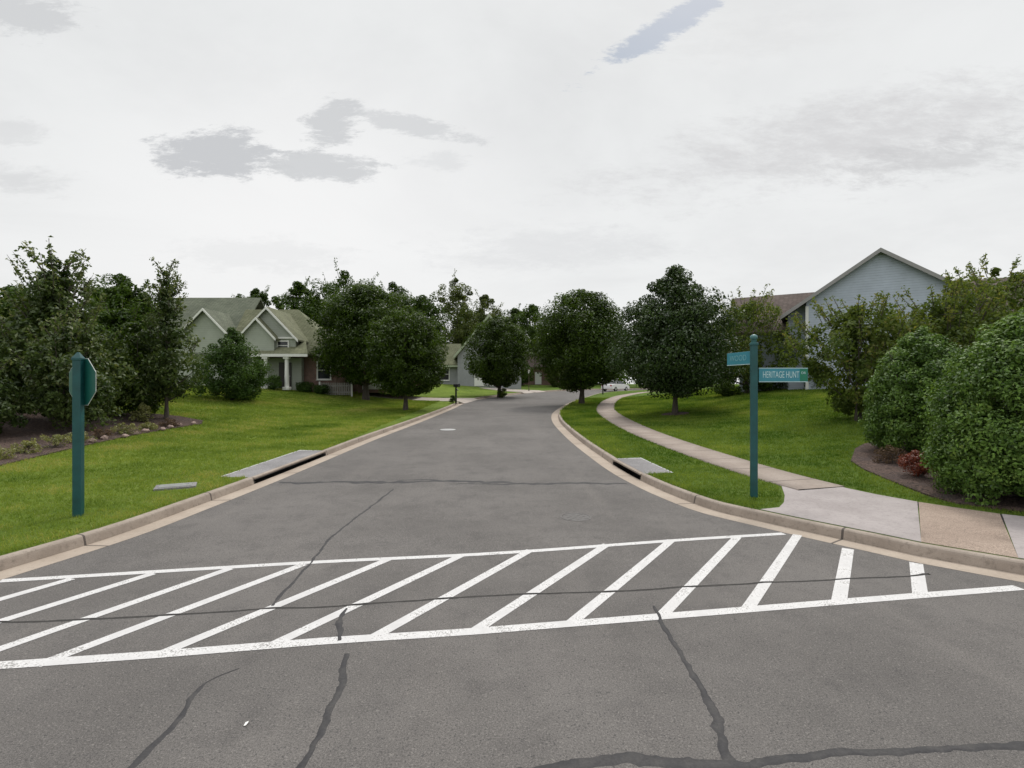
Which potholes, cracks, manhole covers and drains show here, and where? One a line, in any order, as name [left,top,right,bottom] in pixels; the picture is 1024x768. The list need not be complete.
drain grate [612,458,672,480]
manhole cover [560,513,591,521]
drain grate [223,450,326,484]
